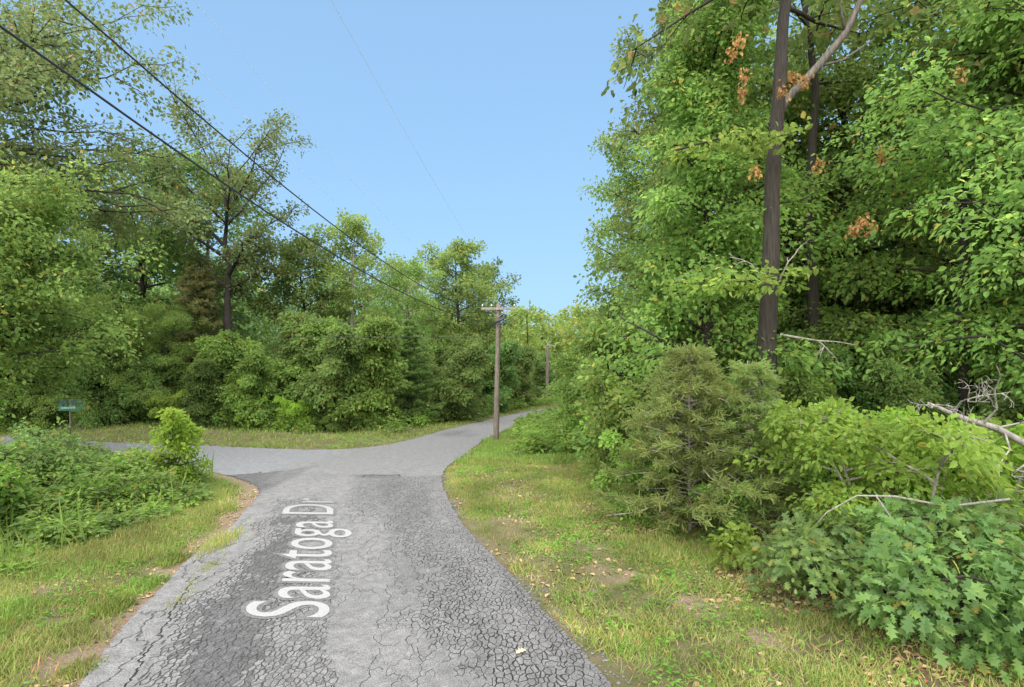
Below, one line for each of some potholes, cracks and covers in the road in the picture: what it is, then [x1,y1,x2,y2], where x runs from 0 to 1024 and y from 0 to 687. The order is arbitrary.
crack [324,476,606,687]
crack [96,499,340,687]
